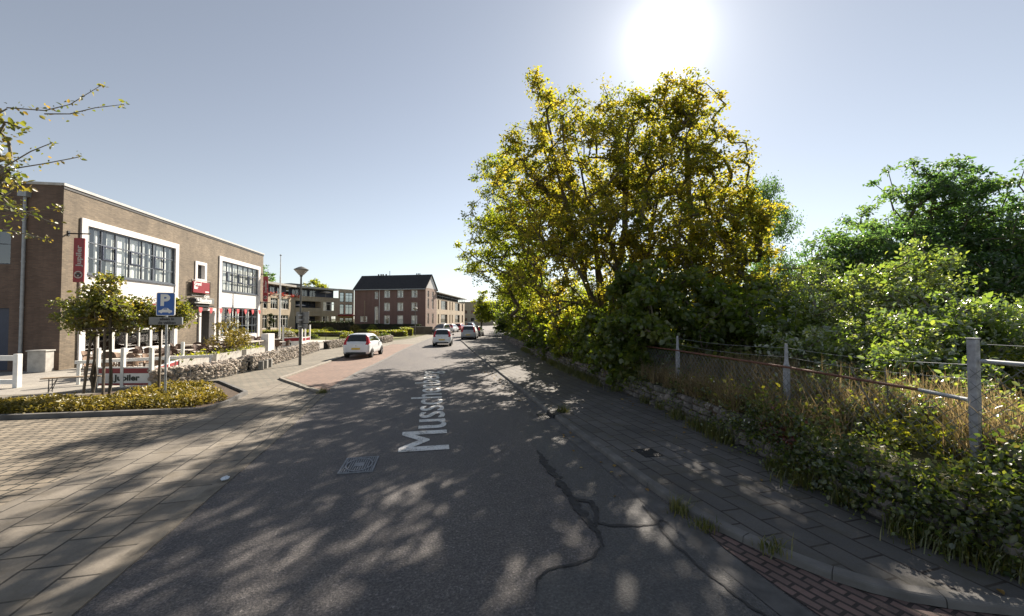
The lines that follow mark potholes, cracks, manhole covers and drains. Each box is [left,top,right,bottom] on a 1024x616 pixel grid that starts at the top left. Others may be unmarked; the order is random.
manhole cover [337,456,379,475]
manhole cover [634,448,663,457]
